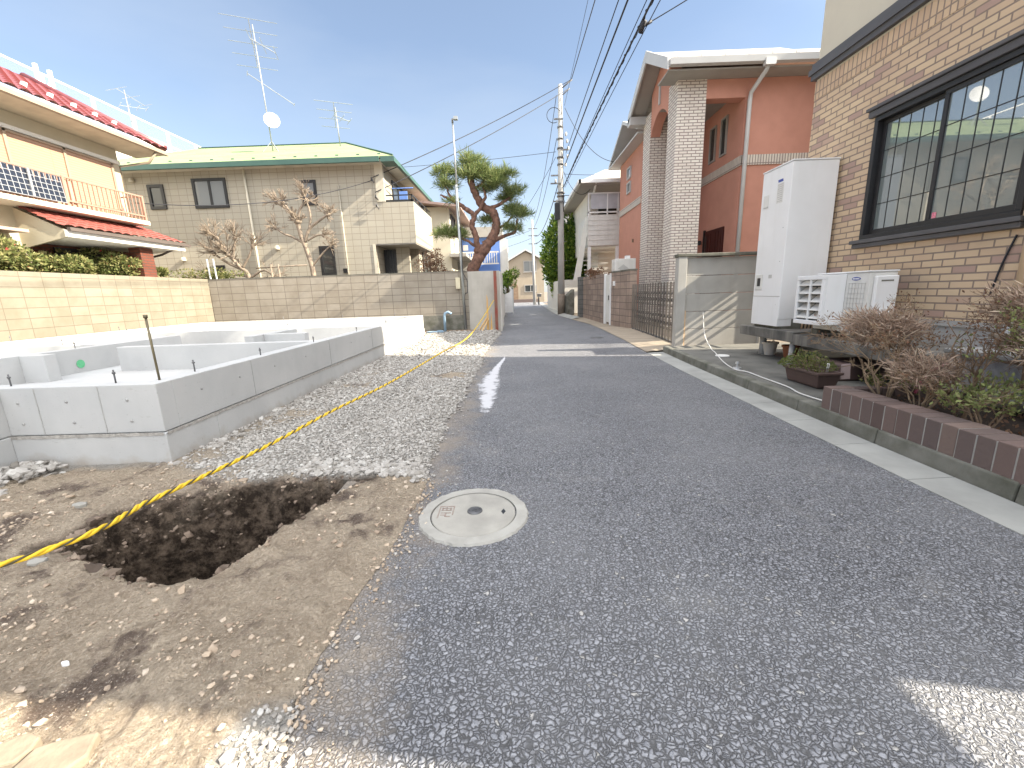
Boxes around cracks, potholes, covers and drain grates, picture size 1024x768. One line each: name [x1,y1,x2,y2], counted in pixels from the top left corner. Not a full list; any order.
manhole cover [418,488,529,547]
